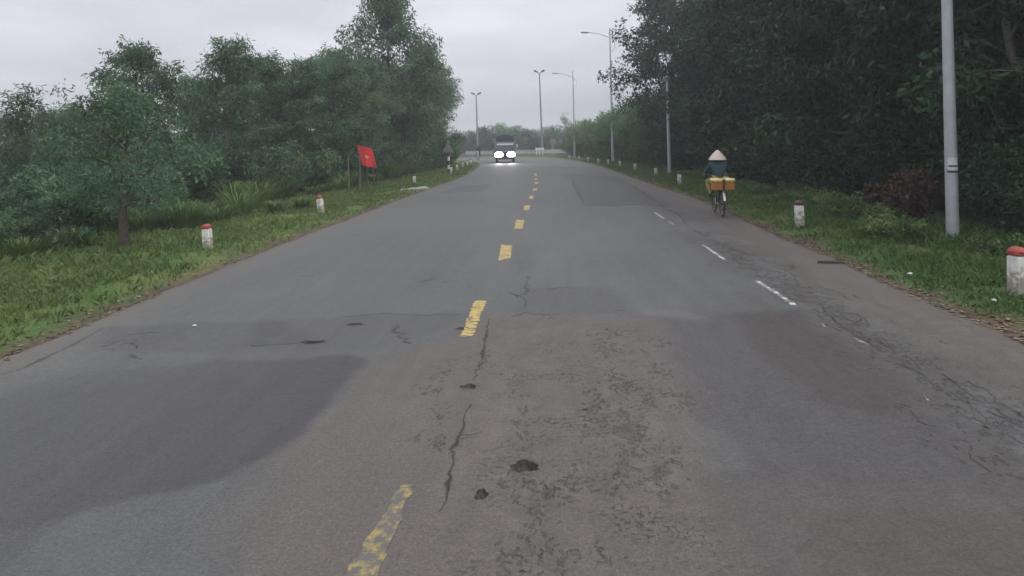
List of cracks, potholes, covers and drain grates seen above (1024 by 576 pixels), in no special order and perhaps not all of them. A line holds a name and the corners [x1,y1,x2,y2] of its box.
crack [510,276,624,320]
crack [699,231,1024,482]
crack [344,313,699,576]
pothole [502,456,547,477]
pothole [466,484,497,505]
pothole [453,382,482,391]
crack [102,332,159,360]
